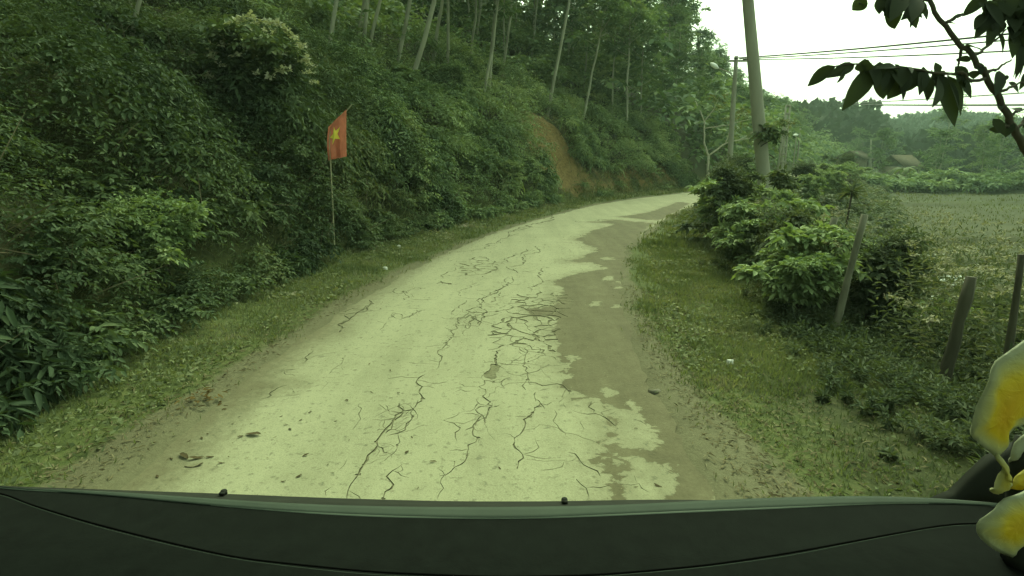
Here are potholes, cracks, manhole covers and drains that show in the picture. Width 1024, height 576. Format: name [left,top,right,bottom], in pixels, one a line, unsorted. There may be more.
crack [325,213,645,499]
